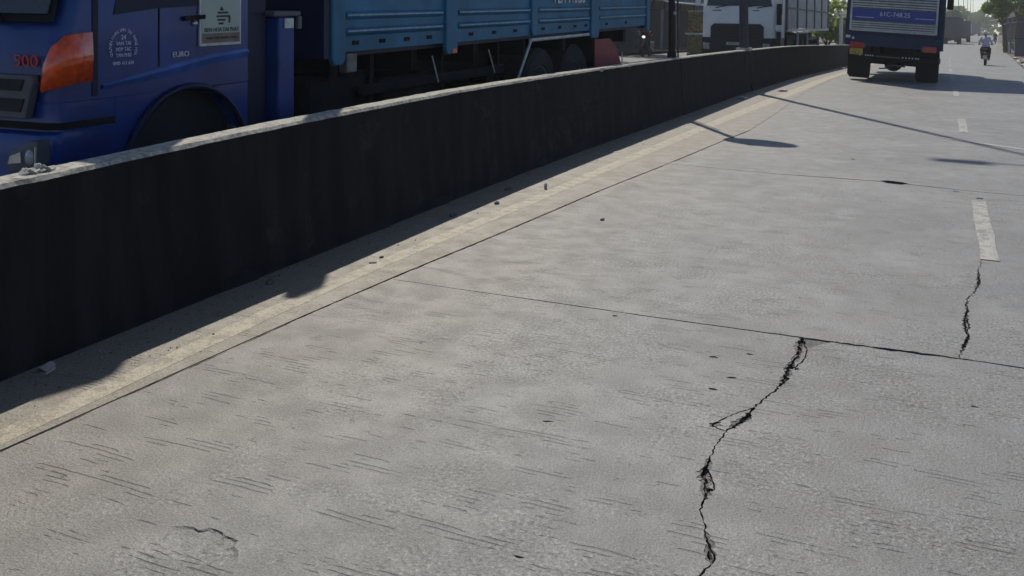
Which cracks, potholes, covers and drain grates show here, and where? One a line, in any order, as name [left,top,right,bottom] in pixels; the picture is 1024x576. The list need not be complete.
crack [697,338,829,576]
pothole [161,526,238,566]
crack [958,261,982,359]
